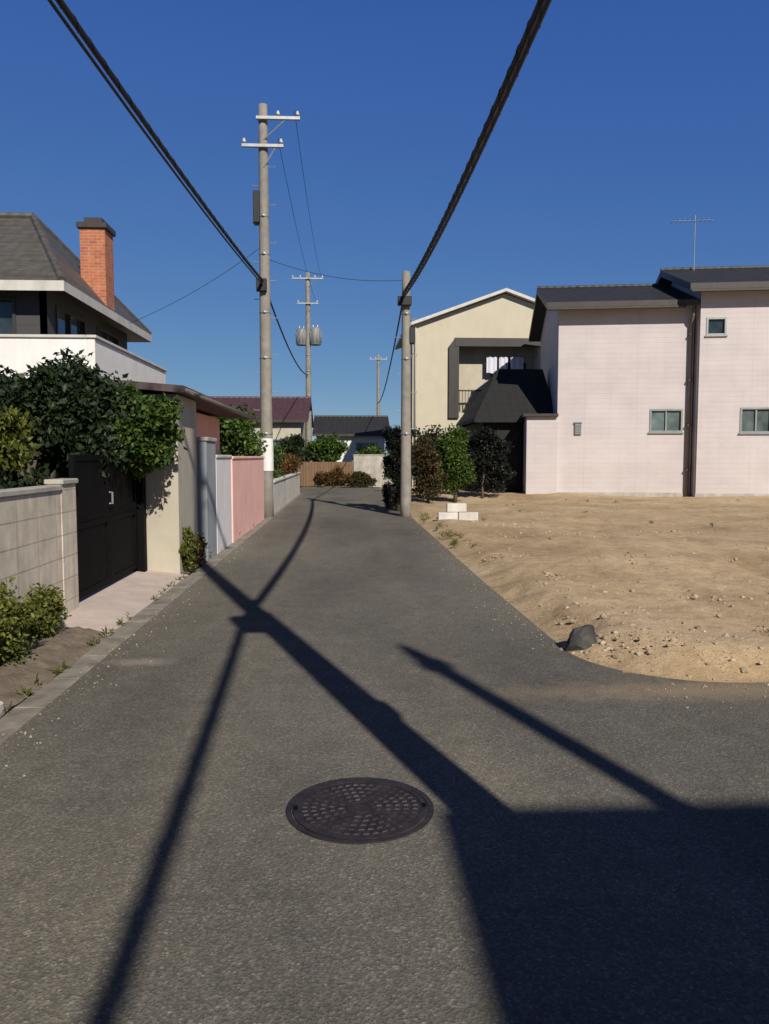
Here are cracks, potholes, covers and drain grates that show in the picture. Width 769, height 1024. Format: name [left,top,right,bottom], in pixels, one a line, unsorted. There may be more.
manhole cover [286,777,434,844]
